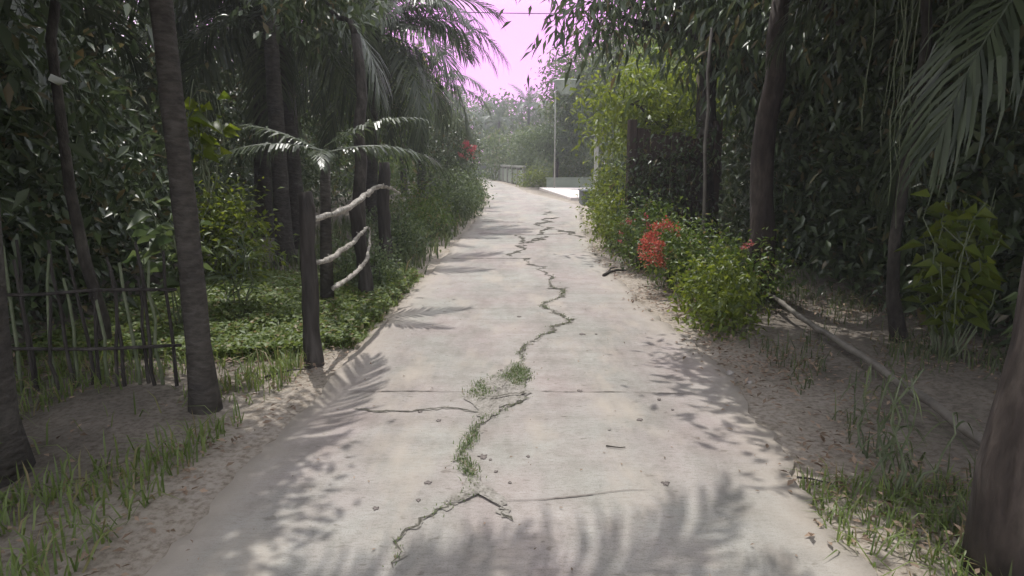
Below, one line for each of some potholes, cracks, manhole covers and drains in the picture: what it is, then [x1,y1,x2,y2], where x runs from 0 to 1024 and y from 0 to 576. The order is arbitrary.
crack [352,391,528,480]
crack [507,211,583,363]
